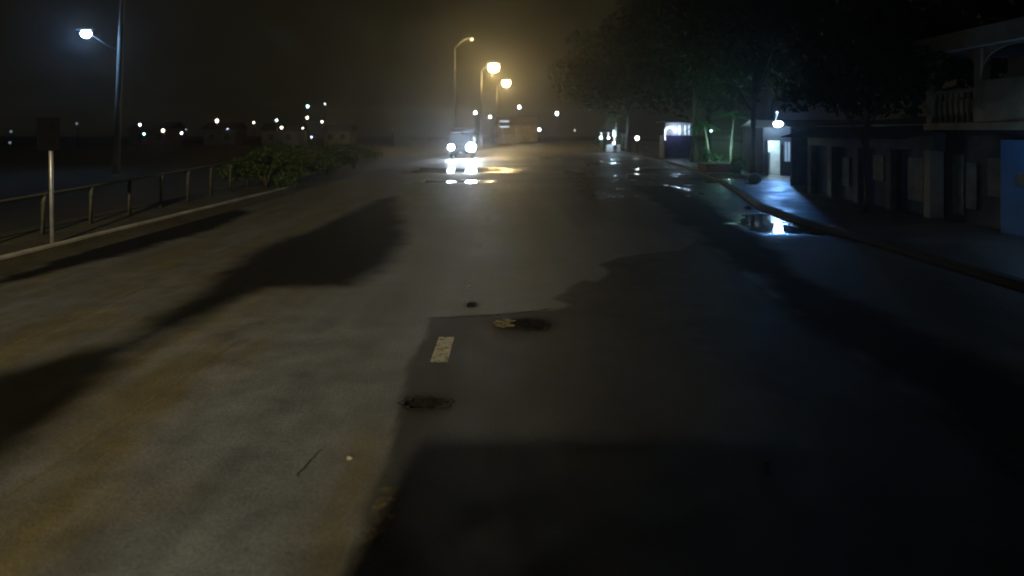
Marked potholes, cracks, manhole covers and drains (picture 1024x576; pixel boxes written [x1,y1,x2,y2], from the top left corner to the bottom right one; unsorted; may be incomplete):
pothole [398,396,455,411]
pothole [493,318,551,331]
